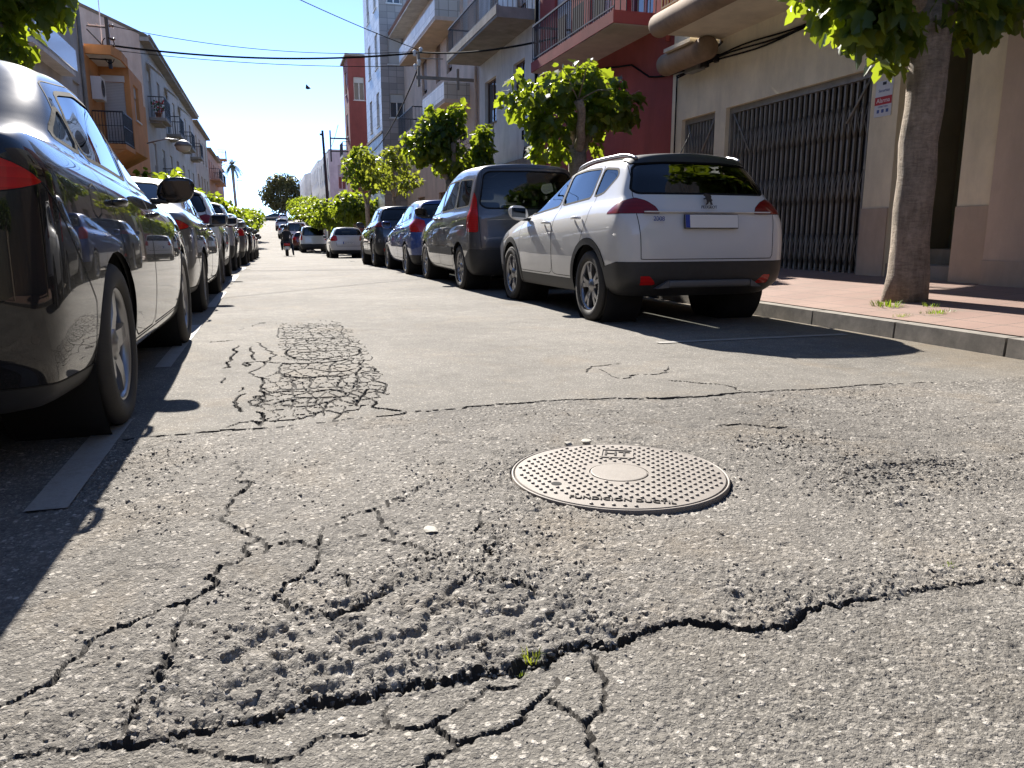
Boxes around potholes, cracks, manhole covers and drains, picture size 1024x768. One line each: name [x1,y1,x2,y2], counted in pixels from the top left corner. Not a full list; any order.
crack [169,653,610,768]
manhole cover [511,444,730,516]
crack [0,465,540,737]
crack [586,363,745,393]
crack [209,320,402,427]
